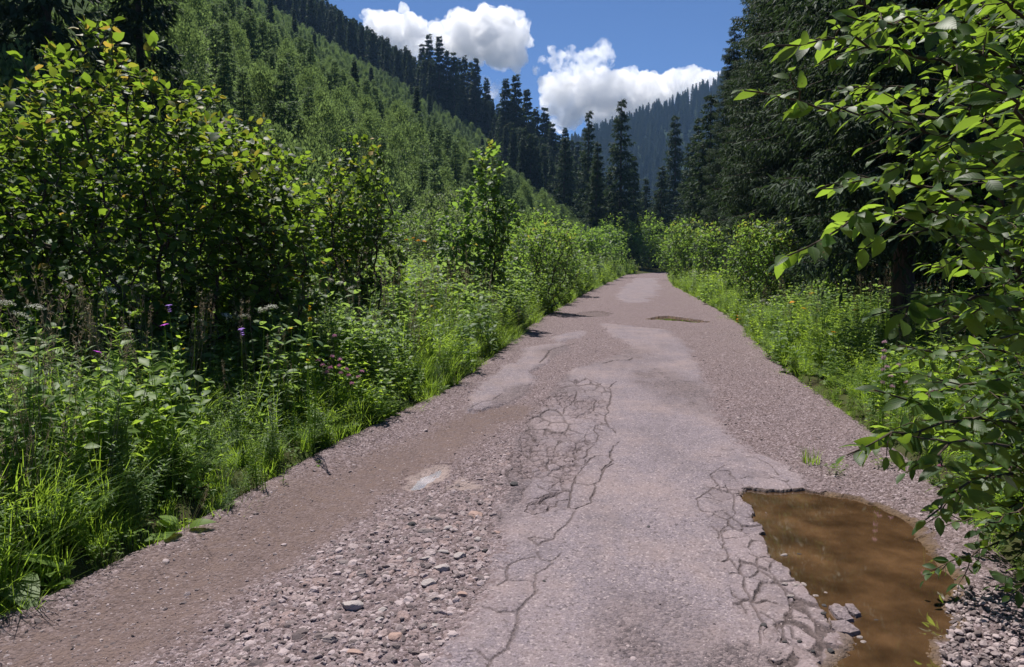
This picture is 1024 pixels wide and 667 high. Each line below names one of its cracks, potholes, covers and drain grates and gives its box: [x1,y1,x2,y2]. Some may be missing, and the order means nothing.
crack [468,343,633,667]
pothole [738,486,967,667]
crack [695,456,839,667]
